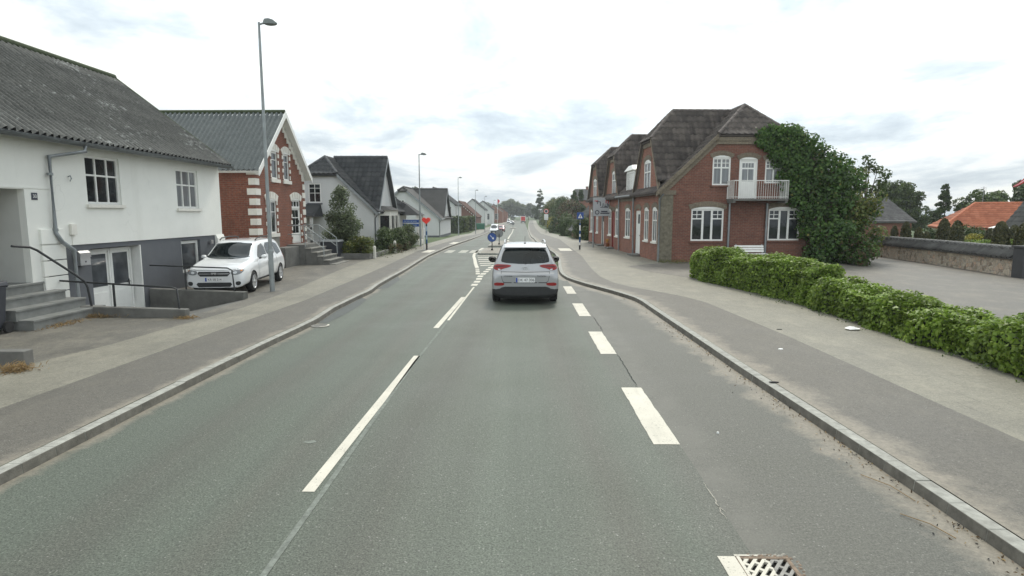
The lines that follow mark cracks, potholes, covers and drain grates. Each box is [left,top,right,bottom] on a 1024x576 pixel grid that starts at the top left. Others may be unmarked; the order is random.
drain grate [735,553,806,576]
